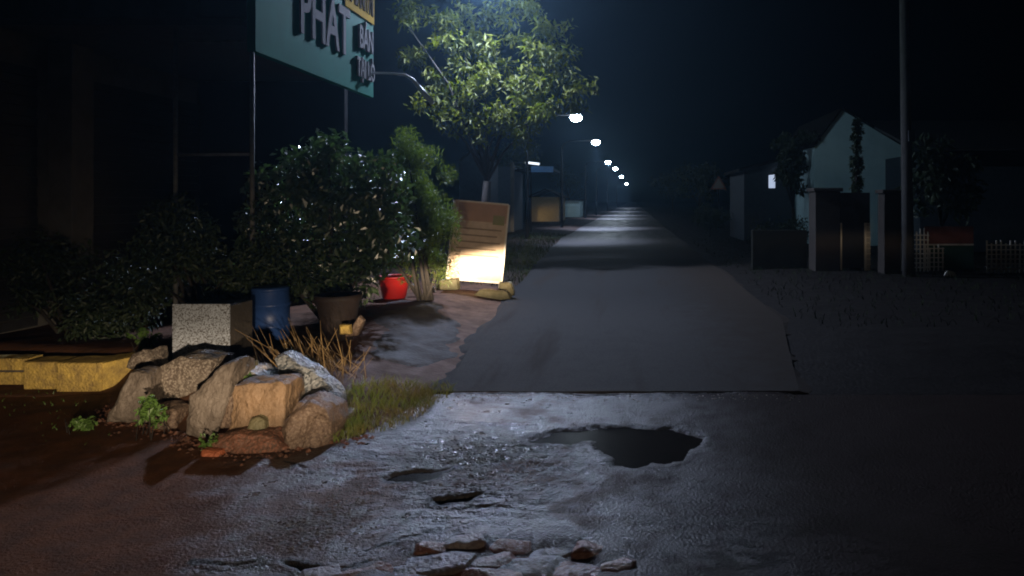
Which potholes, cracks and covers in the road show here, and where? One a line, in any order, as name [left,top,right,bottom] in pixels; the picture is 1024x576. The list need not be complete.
pothole [410,487,499,511]
pothole [513,420,717,472]
pothole [376,461,474,489]
